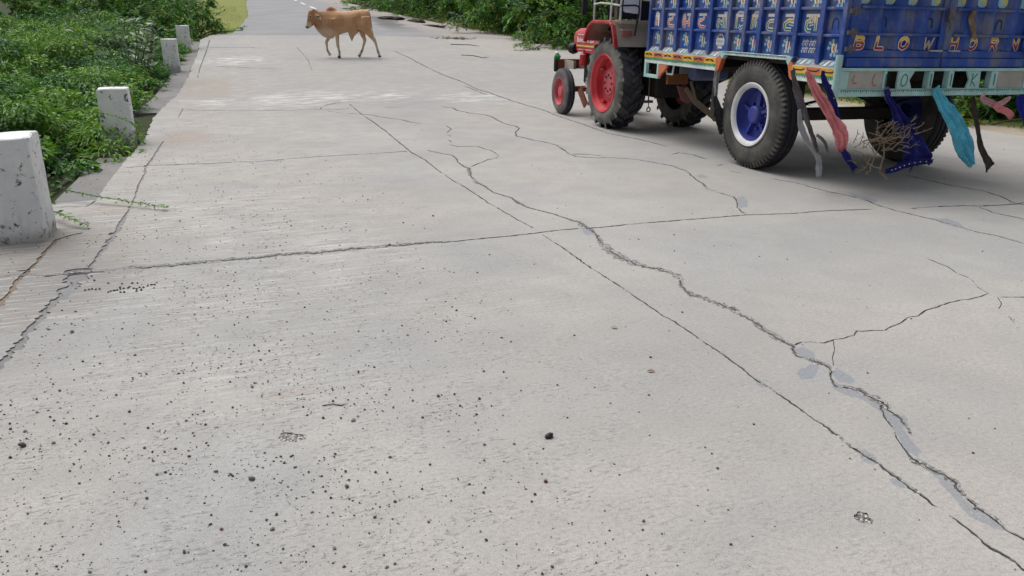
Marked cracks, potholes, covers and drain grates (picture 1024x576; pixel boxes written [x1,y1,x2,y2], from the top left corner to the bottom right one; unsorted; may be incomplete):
crack [394,51,1024,244]
crack [0,141,164,370]
crack [349,104,1024,571]
crack [1,202,1024,277]
